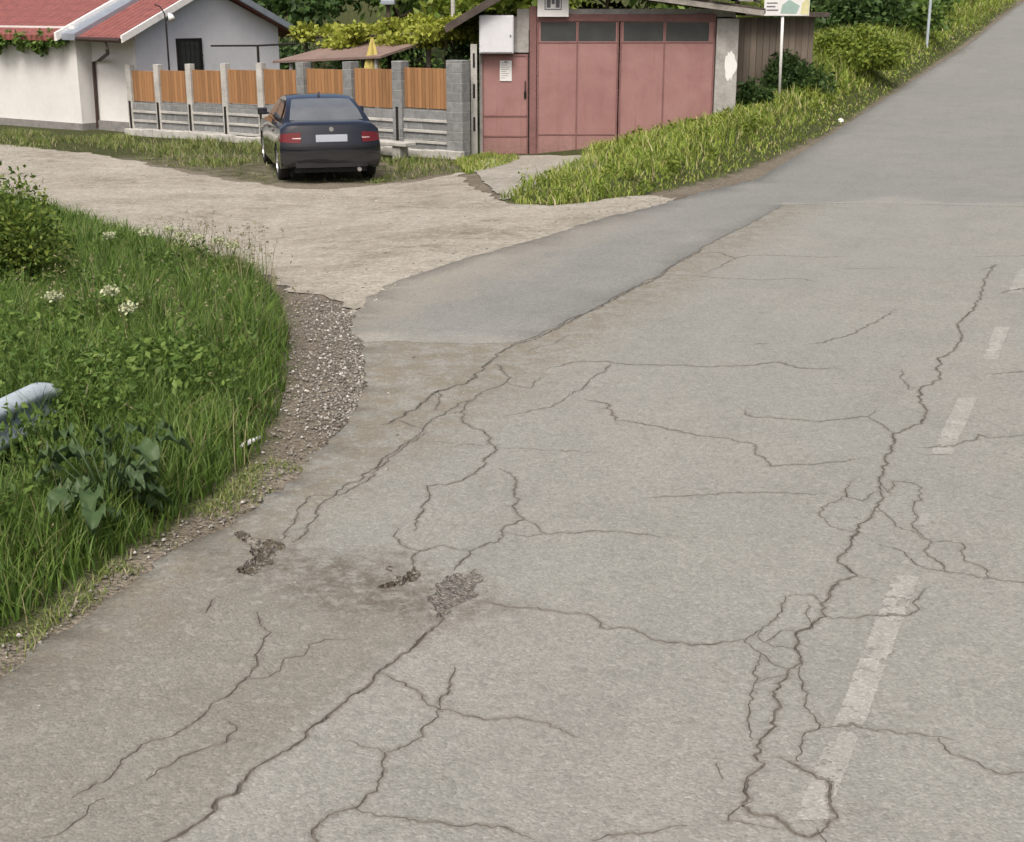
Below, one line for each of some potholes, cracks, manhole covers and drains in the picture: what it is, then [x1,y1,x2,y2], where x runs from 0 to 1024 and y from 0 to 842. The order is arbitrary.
pothole [377,566,421,589]
pothole [426,569,484,618]
pothole [234,531,286,576]
crack [311,667,575,842]
crack [393,401,660,570]
crack [483,256,1024,842]
crack [42,612,347,839]
